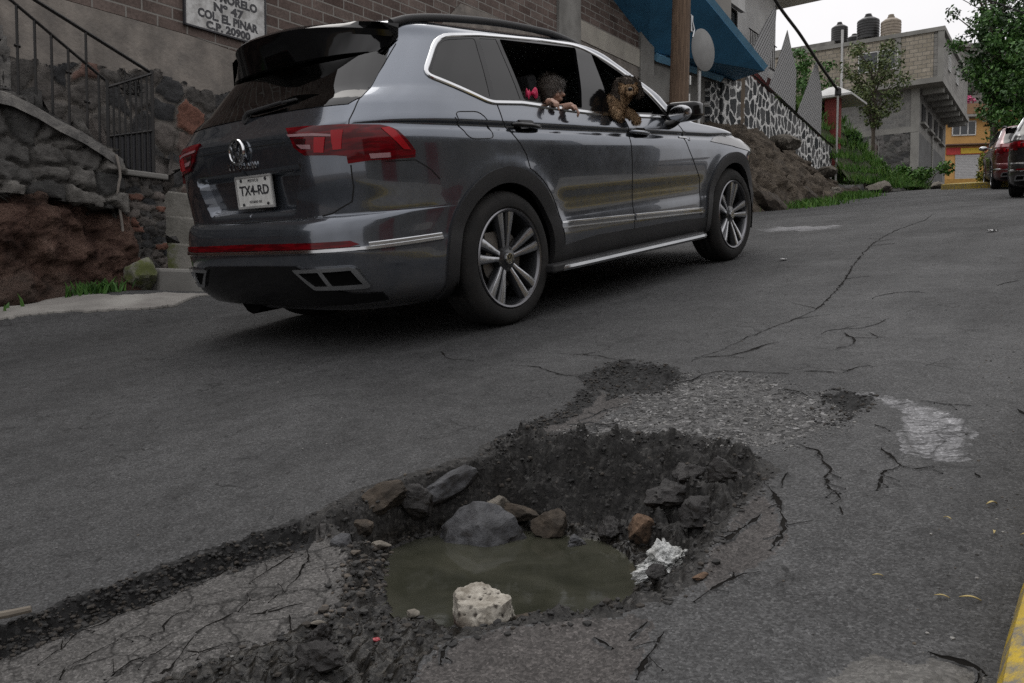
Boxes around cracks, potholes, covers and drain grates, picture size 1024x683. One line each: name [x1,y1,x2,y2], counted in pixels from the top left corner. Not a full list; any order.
crack [38,550,318,681]
crack [710,442,846,551]
crack [692,571,762,604]
crack [592,621,667,681]
crack [440,351,476,361]
pothole [813,390,874,421]
crack [510,352,619,381]
crack [821,318,890,348]
crack [872,291,925,299]
crack [927,651,988,683]
pothole [152,422,782,683]
